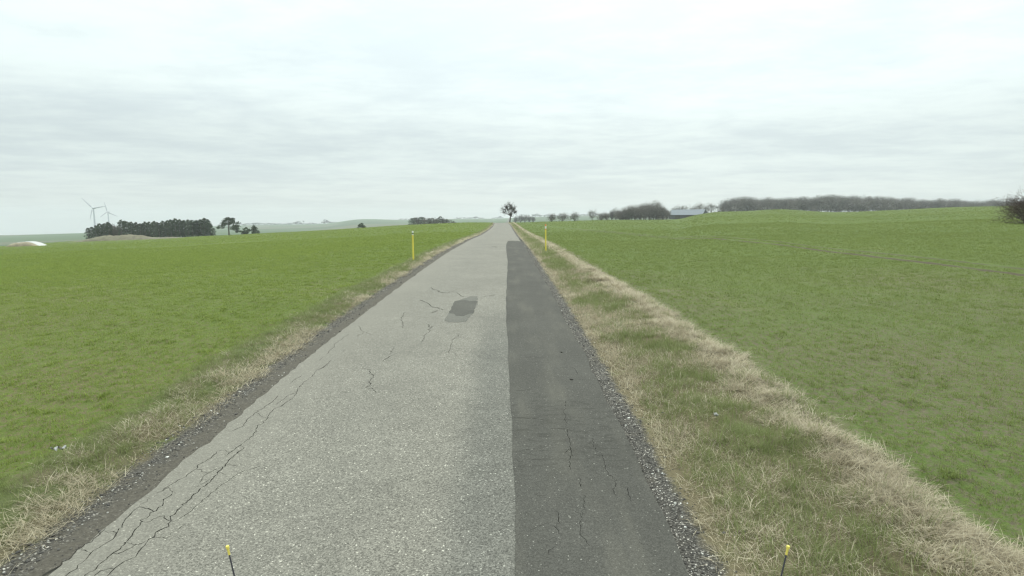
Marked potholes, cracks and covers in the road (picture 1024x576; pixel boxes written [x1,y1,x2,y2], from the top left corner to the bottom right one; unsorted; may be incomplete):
crack [42,361,330,576]
